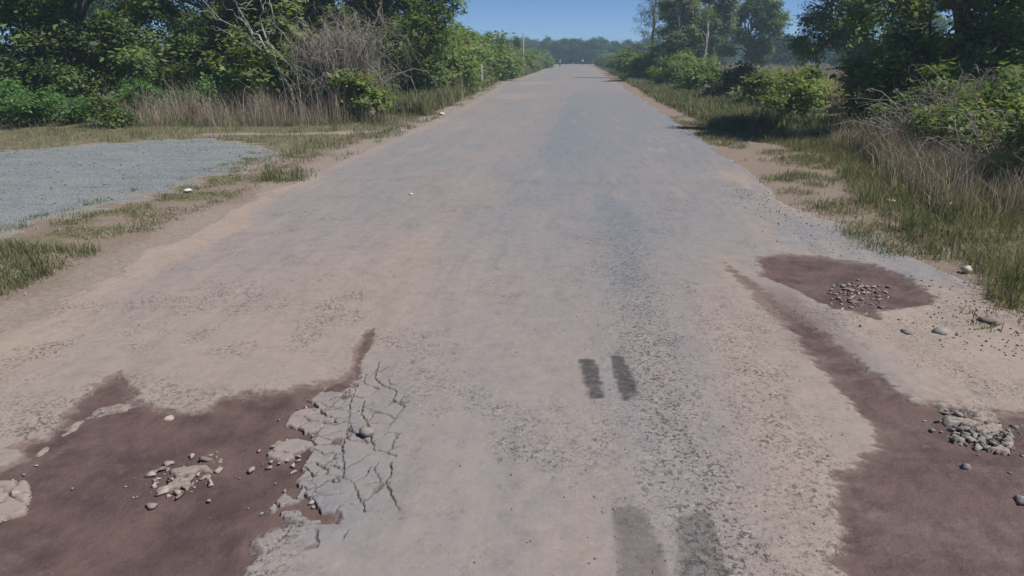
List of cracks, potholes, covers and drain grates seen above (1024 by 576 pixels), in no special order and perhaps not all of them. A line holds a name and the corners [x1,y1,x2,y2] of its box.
pothole [758,255,933,320]
pothole [0,331,372,576]
